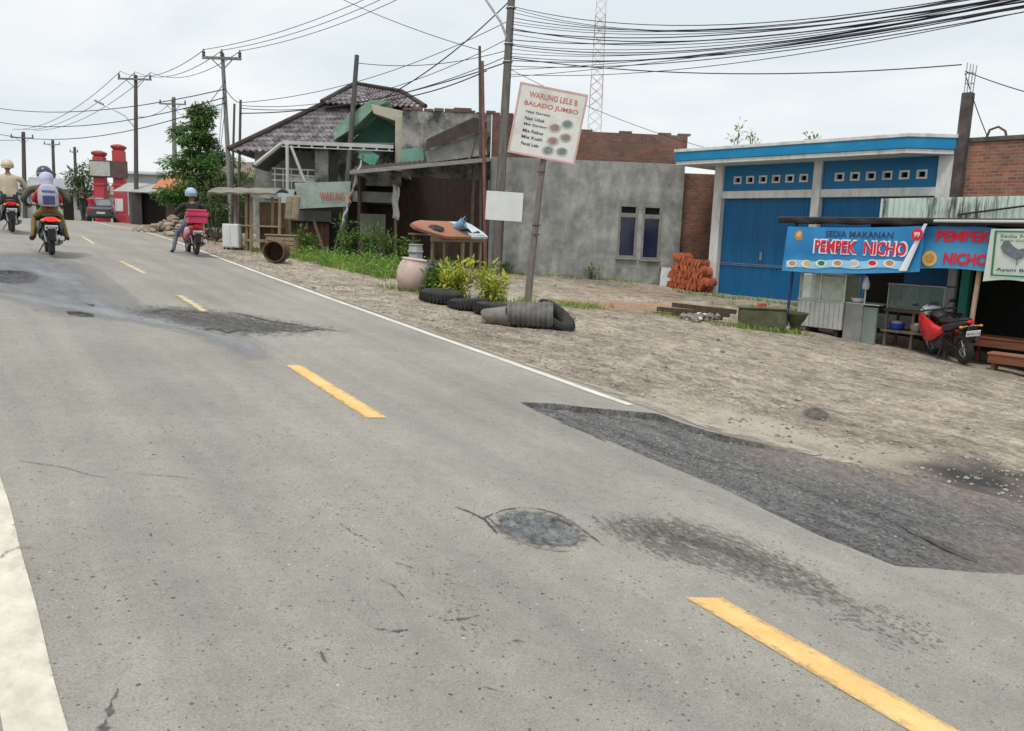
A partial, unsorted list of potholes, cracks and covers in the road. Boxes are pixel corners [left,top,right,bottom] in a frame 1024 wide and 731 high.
pothole [499,513,582,546]
crack [97,688,119,731]
